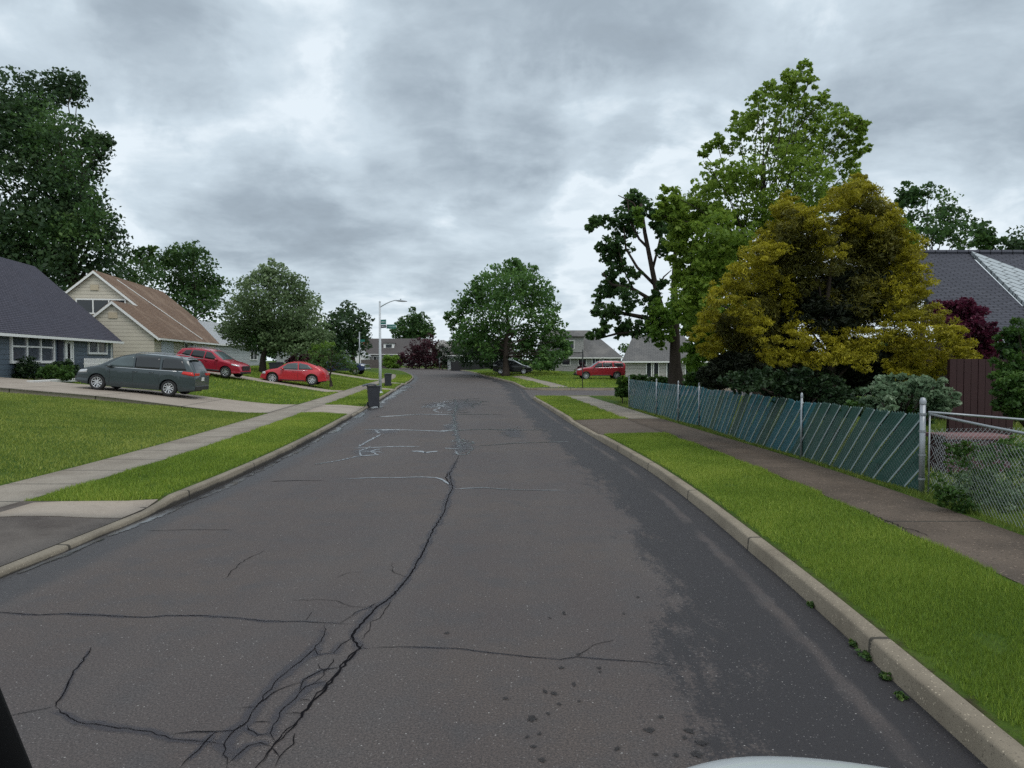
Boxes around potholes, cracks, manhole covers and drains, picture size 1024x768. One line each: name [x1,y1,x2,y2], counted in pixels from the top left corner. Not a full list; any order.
crack [7,398,667,768]
